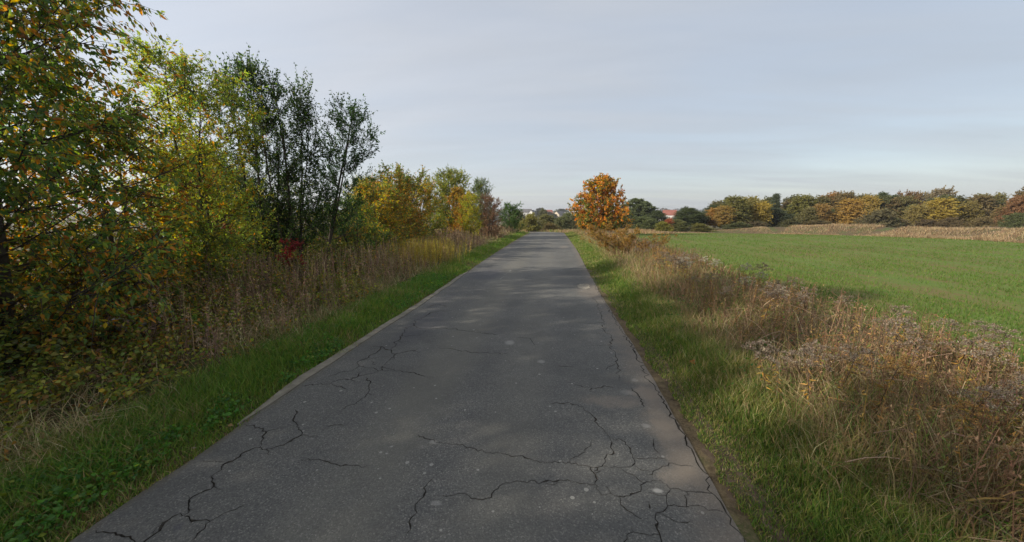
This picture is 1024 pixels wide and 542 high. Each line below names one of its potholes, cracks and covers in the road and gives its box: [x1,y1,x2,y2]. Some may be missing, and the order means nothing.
crack [418,402,723,542]
crack [96,410,367,542]
crack [305,313,495,426]
crack [407,480,431,533]
crack [575,298,644,406]
